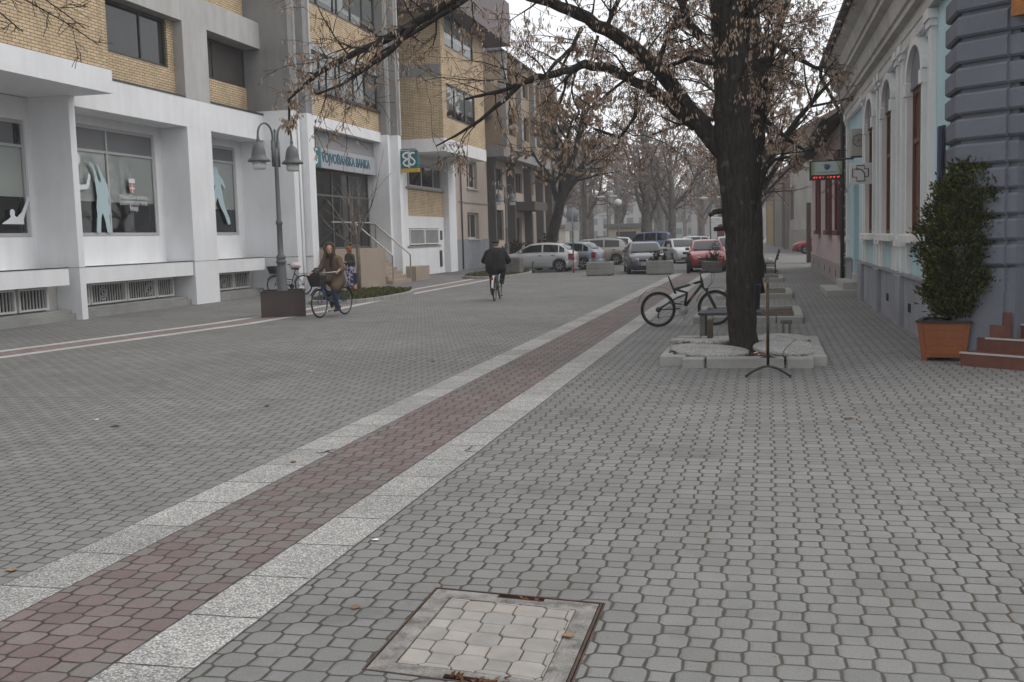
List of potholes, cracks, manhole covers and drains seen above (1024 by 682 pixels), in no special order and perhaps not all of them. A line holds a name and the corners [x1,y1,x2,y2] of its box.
manhole cover [362,587,606,682]
